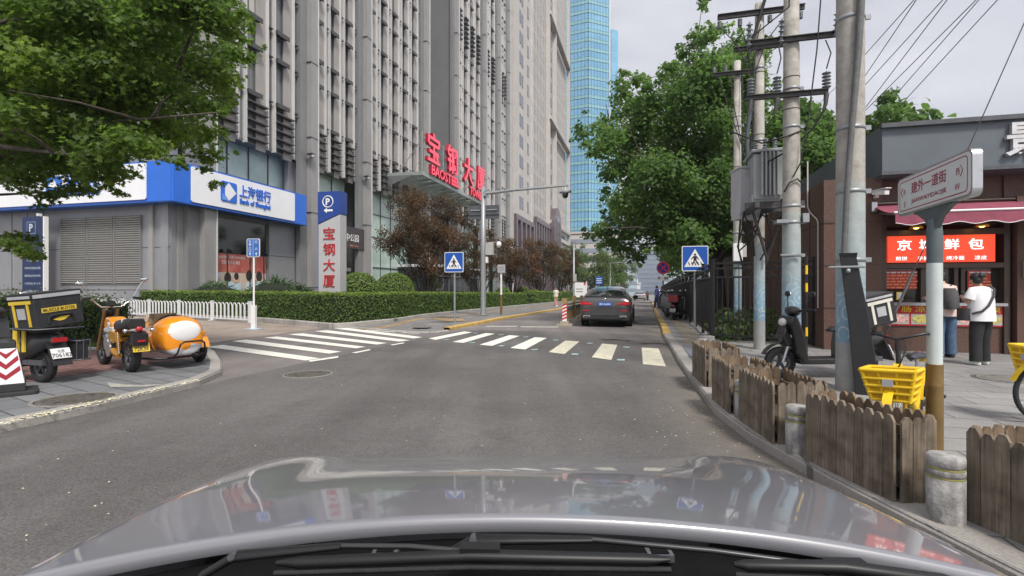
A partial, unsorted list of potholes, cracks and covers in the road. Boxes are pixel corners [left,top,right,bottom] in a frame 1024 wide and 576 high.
manhole cover [27,391,120,407]
manhole cover [282,370,333,378]
manhole cover [970,374,1024,384]
